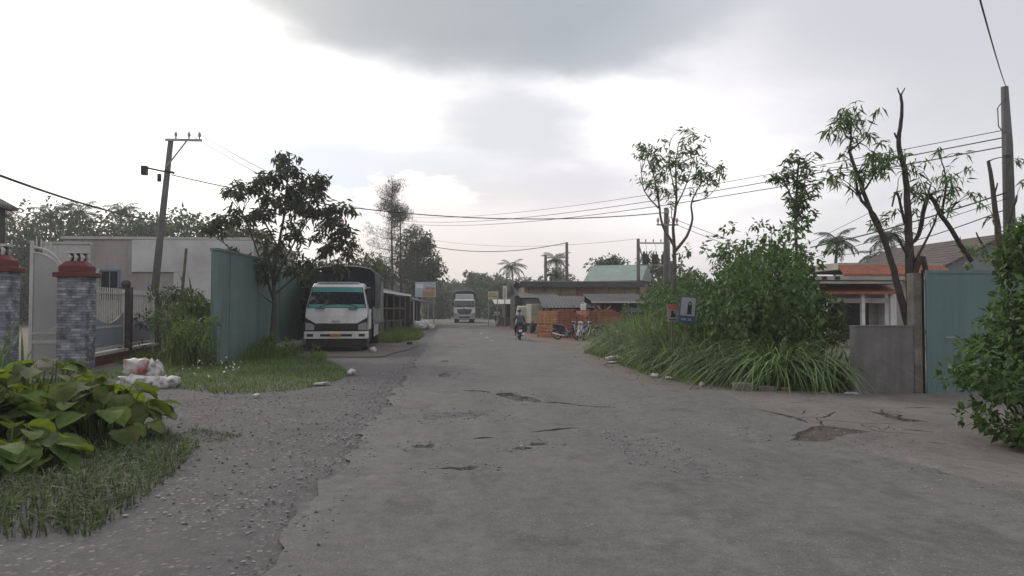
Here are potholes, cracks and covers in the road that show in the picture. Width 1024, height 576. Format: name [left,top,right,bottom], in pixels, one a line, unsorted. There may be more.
crack [760,402,944,444]
pothole [496,393,543,403]
pothole [791,426,870,442]
